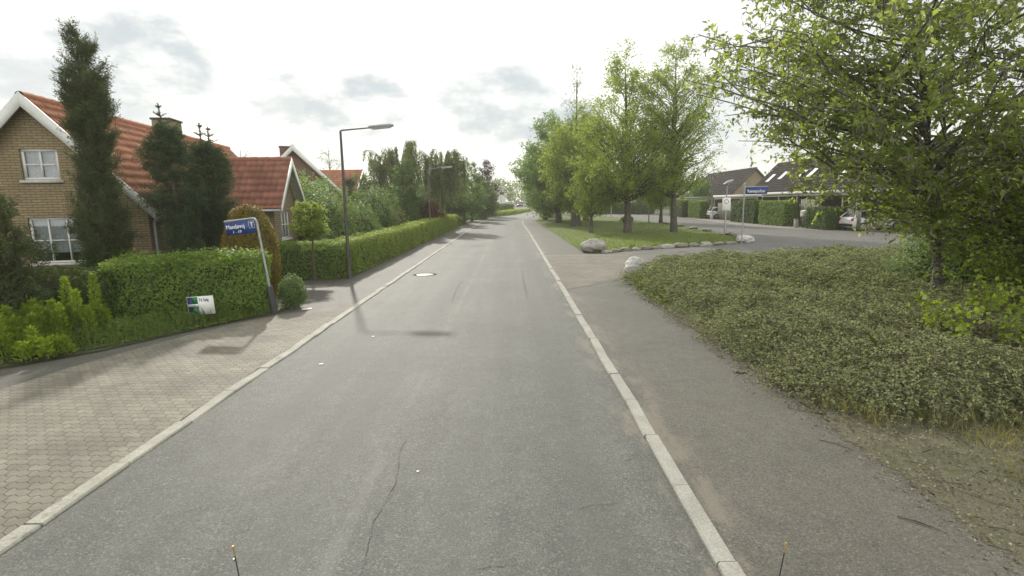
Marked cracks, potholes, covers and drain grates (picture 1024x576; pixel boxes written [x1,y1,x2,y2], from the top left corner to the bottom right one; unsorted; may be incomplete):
crack [360,438,407,575]
